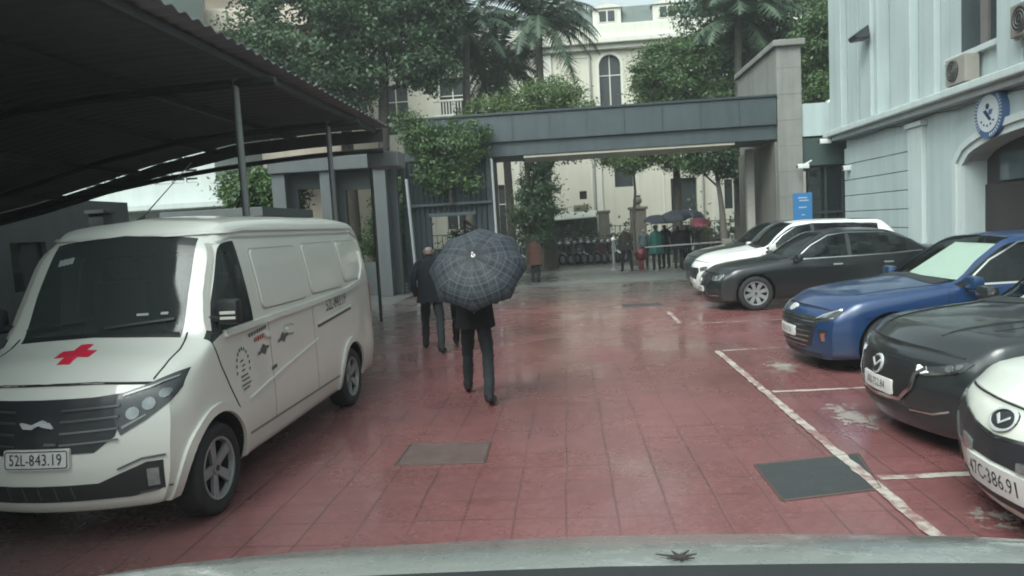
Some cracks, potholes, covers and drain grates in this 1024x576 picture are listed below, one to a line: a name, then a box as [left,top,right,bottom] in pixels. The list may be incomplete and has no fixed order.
manhole cover [394,441,492,466]
manhole cover [753,453,881,502]
